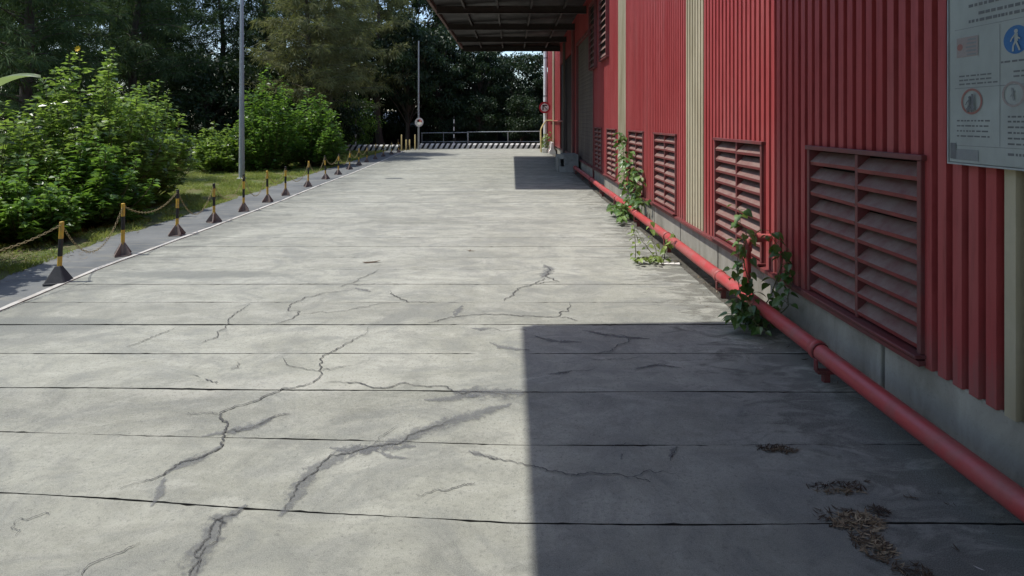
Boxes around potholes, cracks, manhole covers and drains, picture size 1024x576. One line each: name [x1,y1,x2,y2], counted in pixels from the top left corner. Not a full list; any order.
crack [188,506,247,575]
crack [274,270,426,324]
crack [429,266,669,374]
crack [468,447,677,482]
crack [120,327,508,489]
